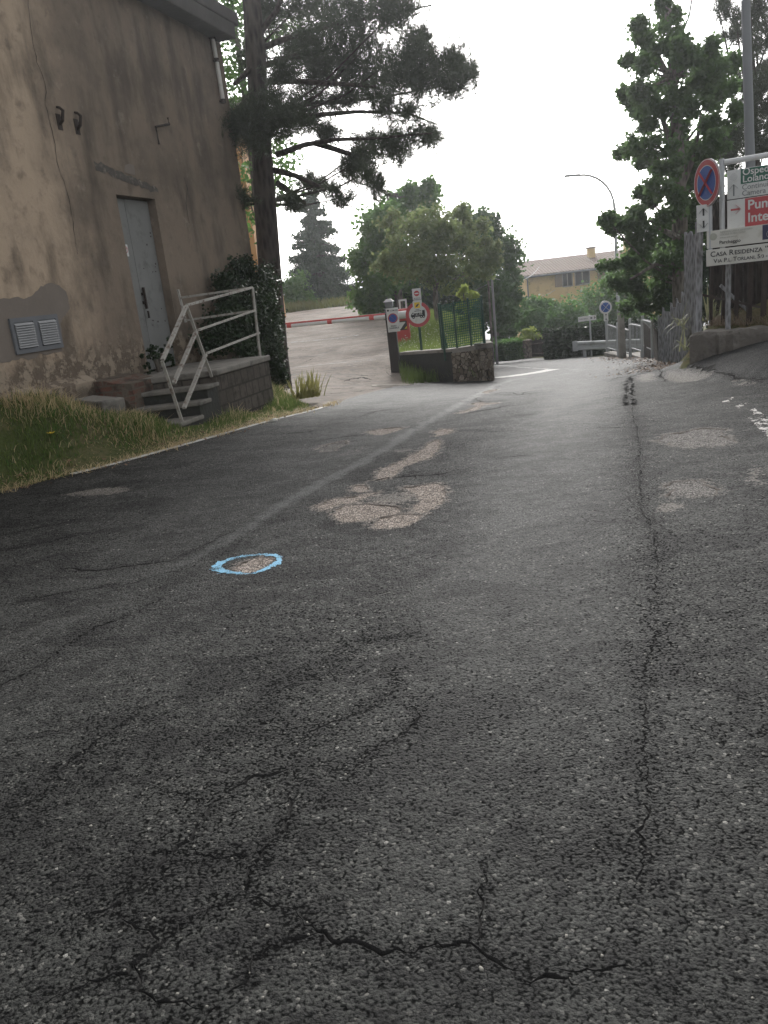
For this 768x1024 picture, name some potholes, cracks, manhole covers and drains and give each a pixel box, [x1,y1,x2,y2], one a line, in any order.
crack [589,369,668,913]
crack [51,769,642,1024]
pothole [232,556,274,573]
